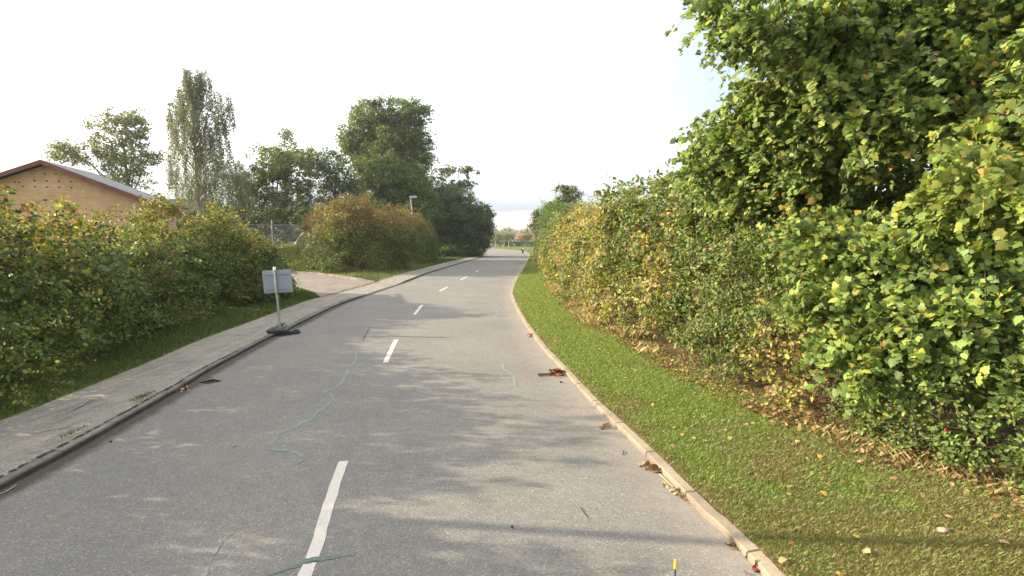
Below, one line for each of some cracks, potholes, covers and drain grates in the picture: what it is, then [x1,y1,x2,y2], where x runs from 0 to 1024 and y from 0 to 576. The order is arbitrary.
crack [202,532,234,576]
crack [265,328,377,465]
